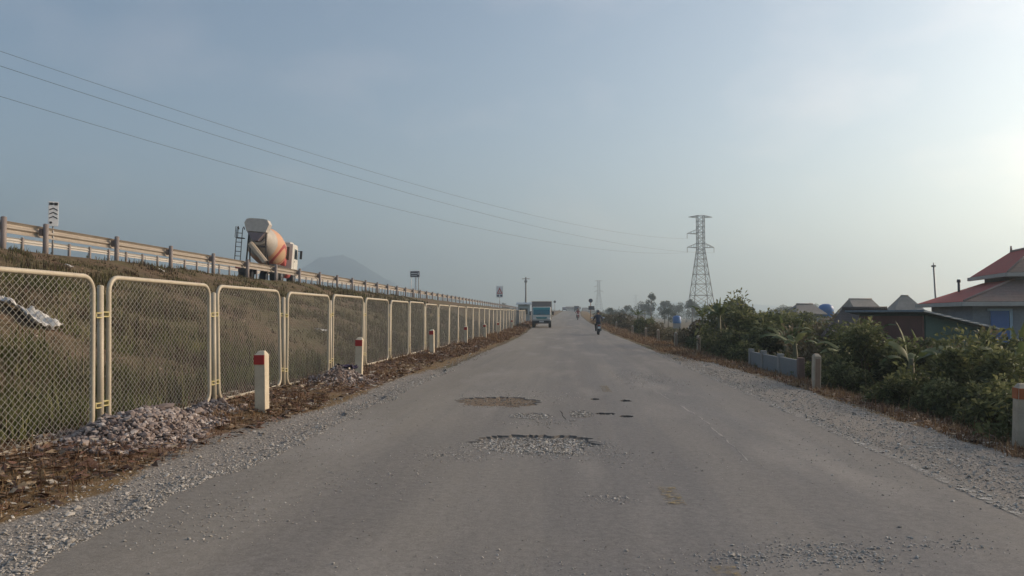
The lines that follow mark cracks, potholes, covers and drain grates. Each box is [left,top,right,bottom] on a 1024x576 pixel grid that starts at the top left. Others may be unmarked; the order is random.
pothole [467,434,602,455]
pothole [454,396,542,408]
pothole [569,410,594,418]
